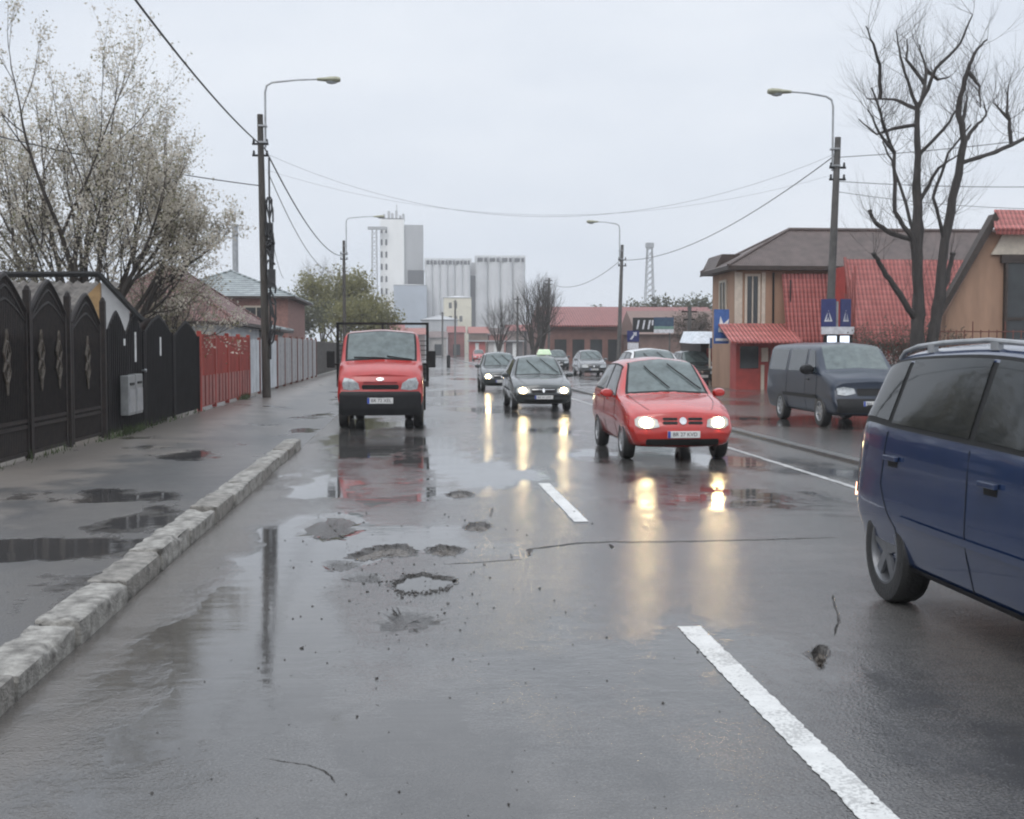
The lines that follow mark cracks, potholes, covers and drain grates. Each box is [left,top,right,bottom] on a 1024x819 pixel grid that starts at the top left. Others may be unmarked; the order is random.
crack [266,758,335,783]
pothole [344,543,420,562]
pothole [423,544,467,557]
pothole [366,605,454,637]
pothole [385,571,459,595]
crack [831,595,841,636]
pothole [802,644,831,670]
crack [443,537,840,565]
pothole [293,513,369,543]
pothole [462,521,495,532]
pothole [444,490,476,498]
